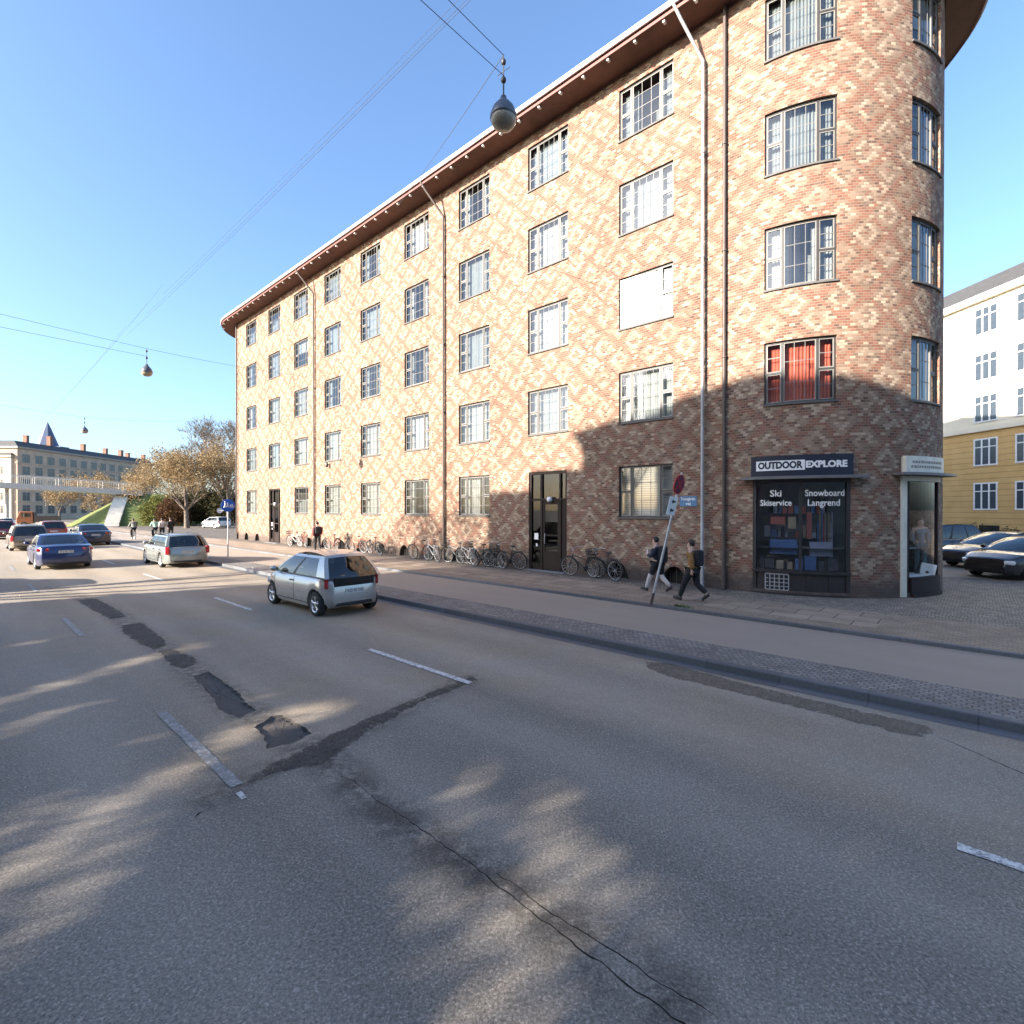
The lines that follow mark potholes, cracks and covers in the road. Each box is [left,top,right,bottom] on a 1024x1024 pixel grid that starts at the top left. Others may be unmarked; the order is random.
crack [341,775,718,1024]
pothole [254,715,312,749]
